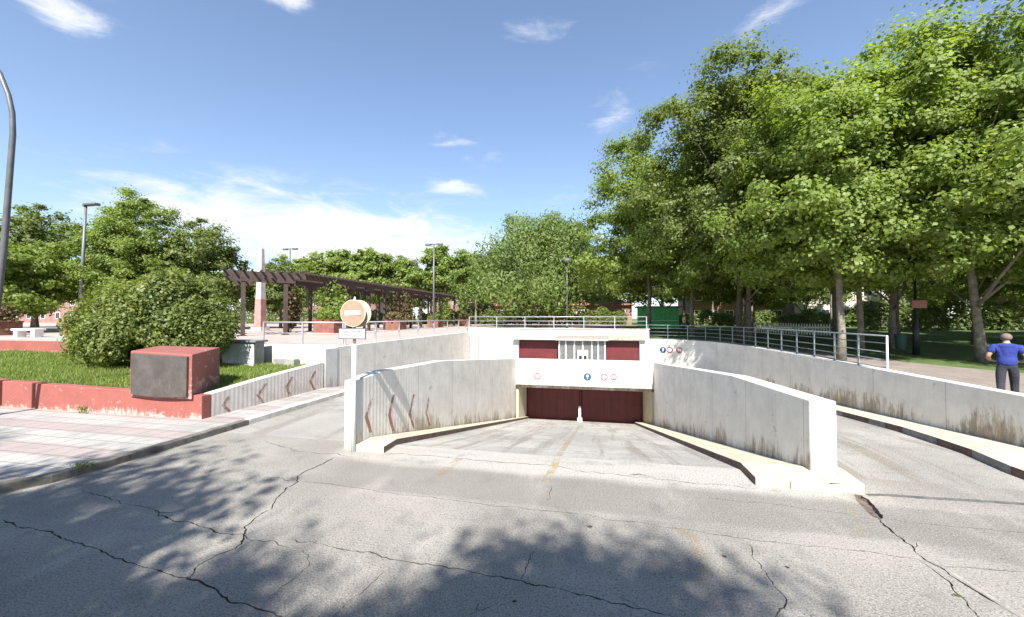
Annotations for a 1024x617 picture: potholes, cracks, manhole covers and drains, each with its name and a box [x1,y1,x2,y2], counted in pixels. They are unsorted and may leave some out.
crack [716,498,1021,617]
crack [4,441,673,617]
